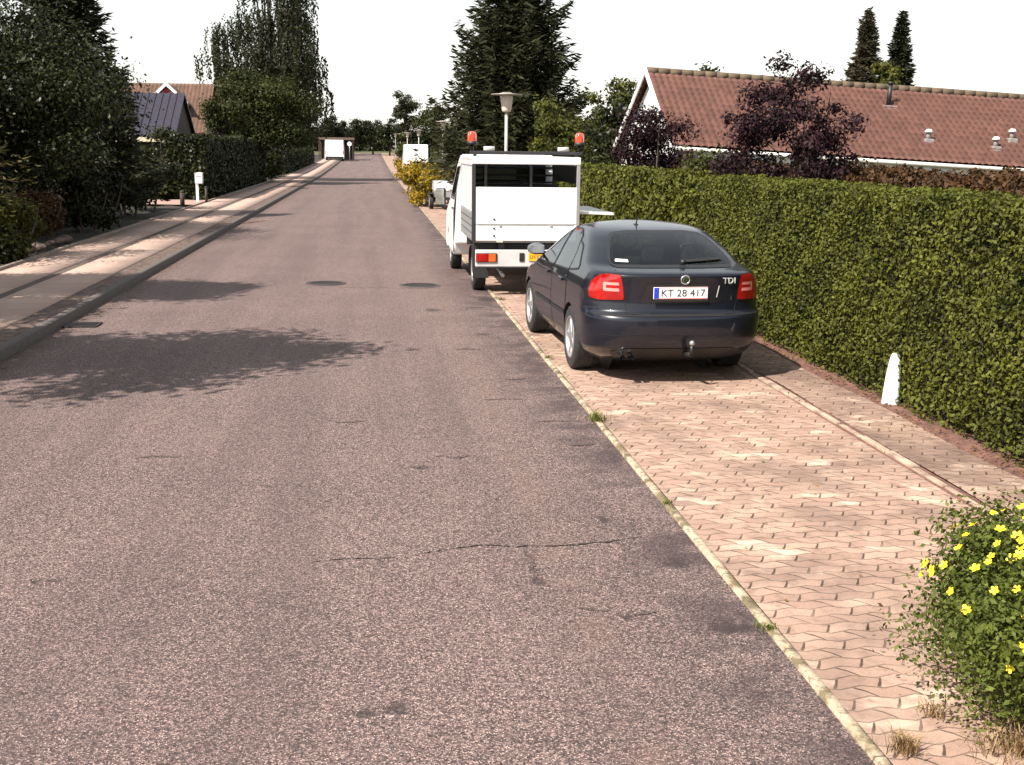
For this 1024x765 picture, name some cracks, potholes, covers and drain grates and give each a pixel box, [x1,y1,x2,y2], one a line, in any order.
crack [426,536,642,576]
